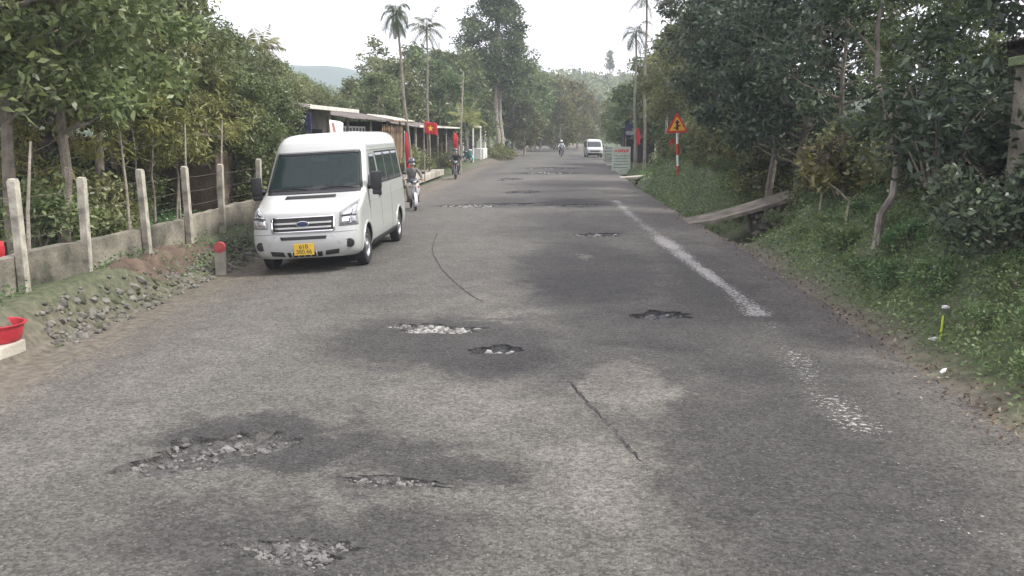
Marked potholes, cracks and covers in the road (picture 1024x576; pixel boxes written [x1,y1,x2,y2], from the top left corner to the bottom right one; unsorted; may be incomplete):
pothole [628,310,693,320]
pothole [338,474,452,488]
pothole [384,323,490,334]
pothole [468,344,525,355]
crack [431,234,483,302]
pothole [218,536,371,569]
crack [570,381,642,462]
pothole [103,429,304,479]
